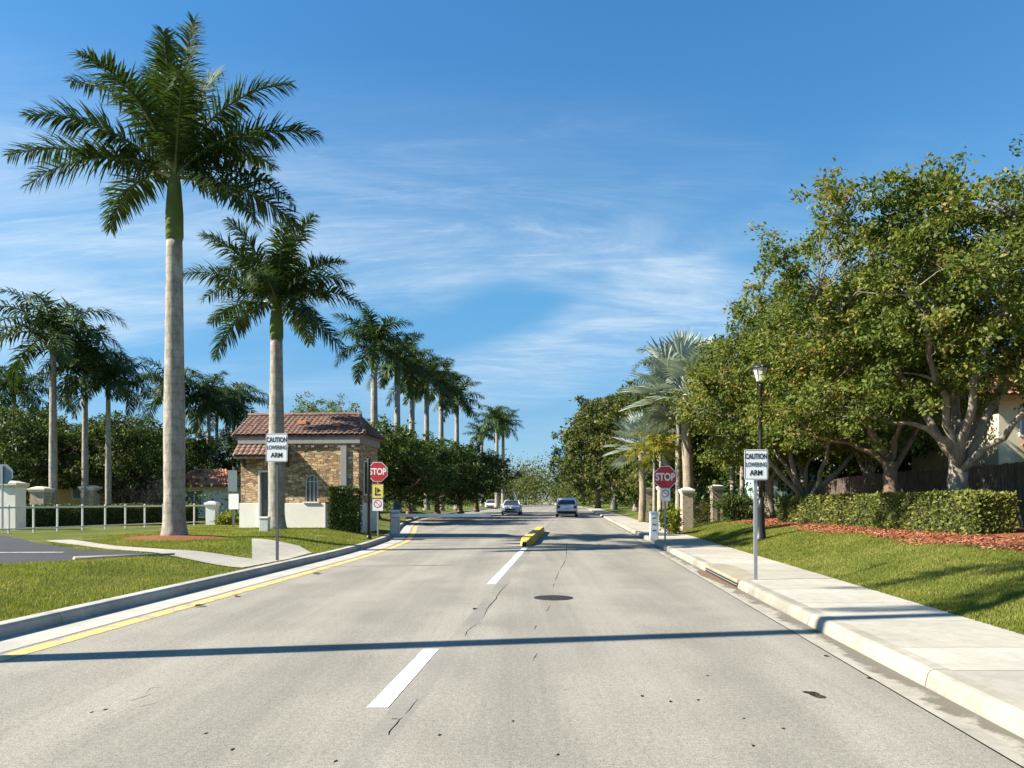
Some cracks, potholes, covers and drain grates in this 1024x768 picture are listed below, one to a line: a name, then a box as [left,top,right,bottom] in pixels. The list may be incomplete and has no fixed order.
drain grate [697,563,753,590]
